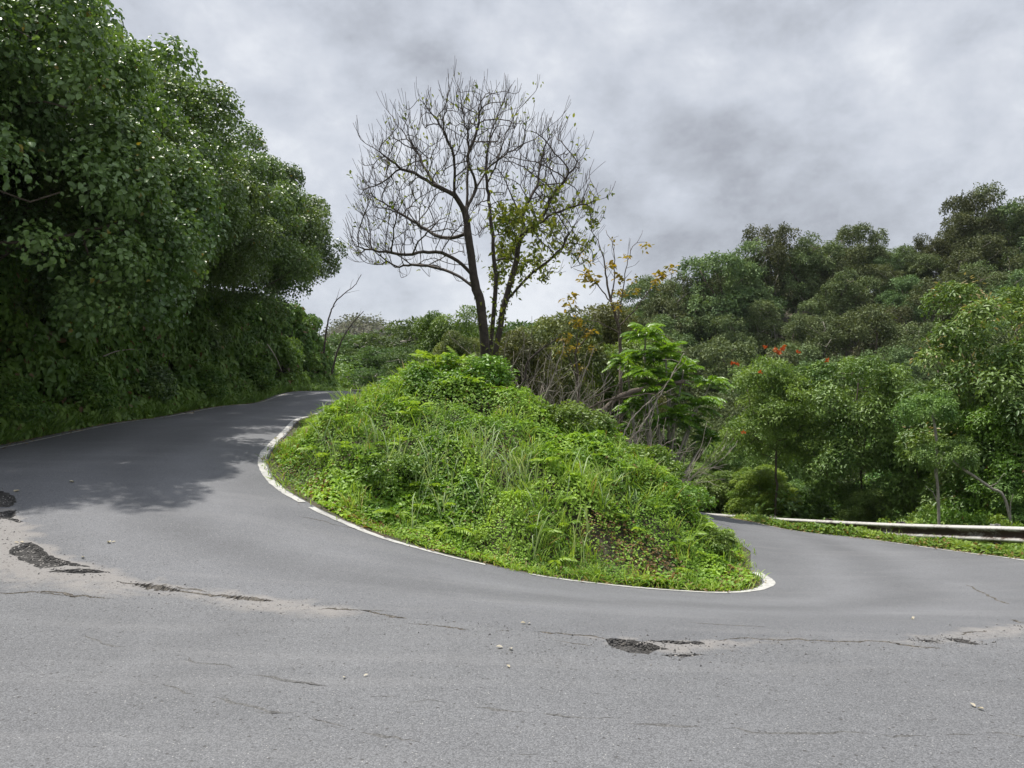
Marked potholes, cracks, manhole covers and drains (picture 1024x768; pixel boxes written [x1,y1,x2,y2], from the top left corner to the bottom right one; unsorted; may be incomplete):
crack [318,608,608,646]
pothole [0,491,21,523]
crack [692,622,938,649]
pothole [9,542,110,574]
crack [82,634,1024,755]
crack [2,581,273,602]
crack [967,585,1021,623]
pothole [606,638,704,657]
